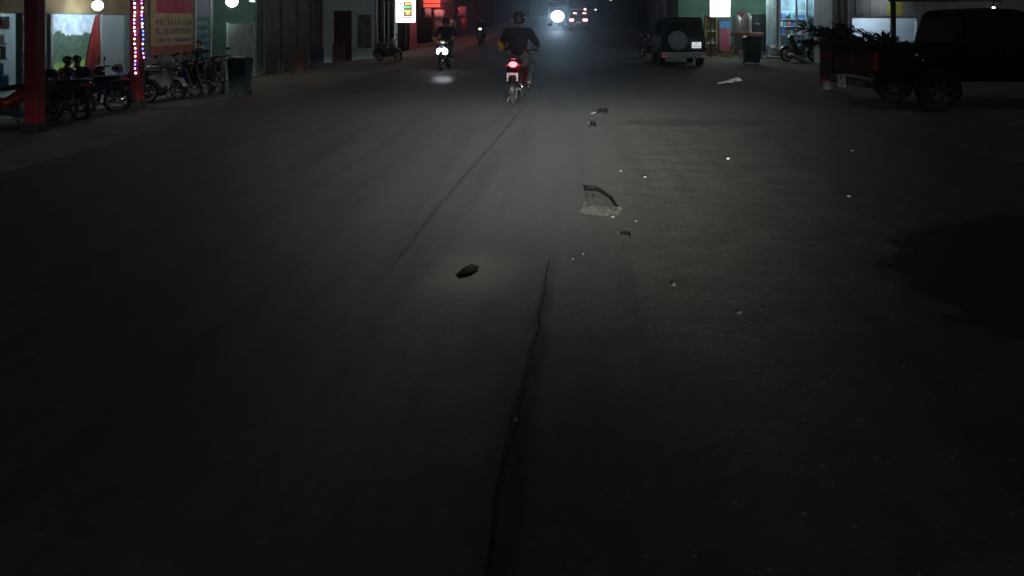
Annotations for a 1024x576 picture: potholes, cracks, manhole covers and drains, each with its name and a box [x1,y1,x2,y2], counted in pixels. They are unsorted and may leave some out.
pothole [455,264,479,278]
crack [390,112,550,576]
pothole [590,107,608,117]
pothole [579,185,622,216]
